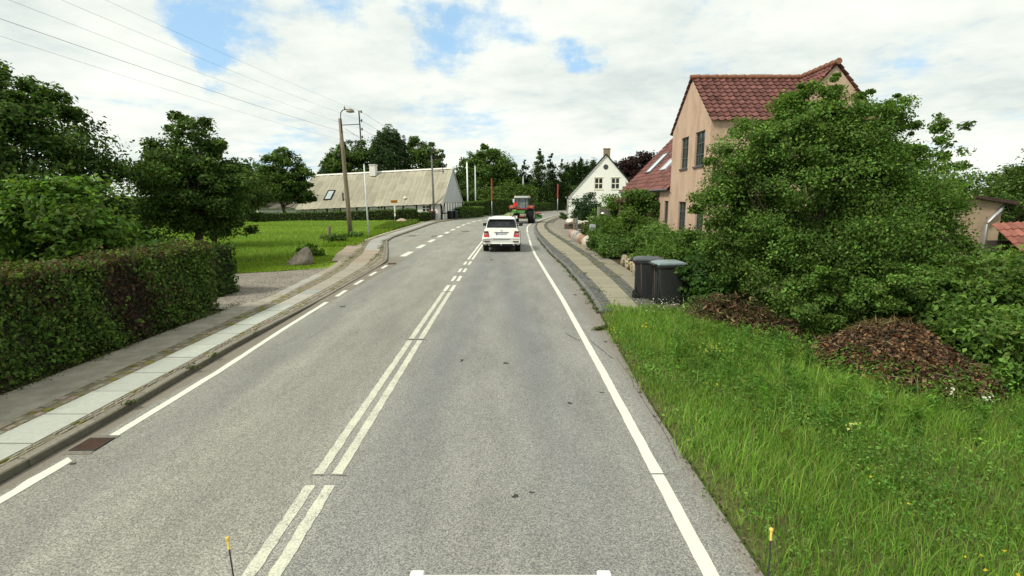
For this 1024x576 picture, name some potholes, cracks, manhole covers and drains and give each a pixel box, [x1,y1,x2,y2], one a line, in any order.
drain grate [62,435,121,455]
